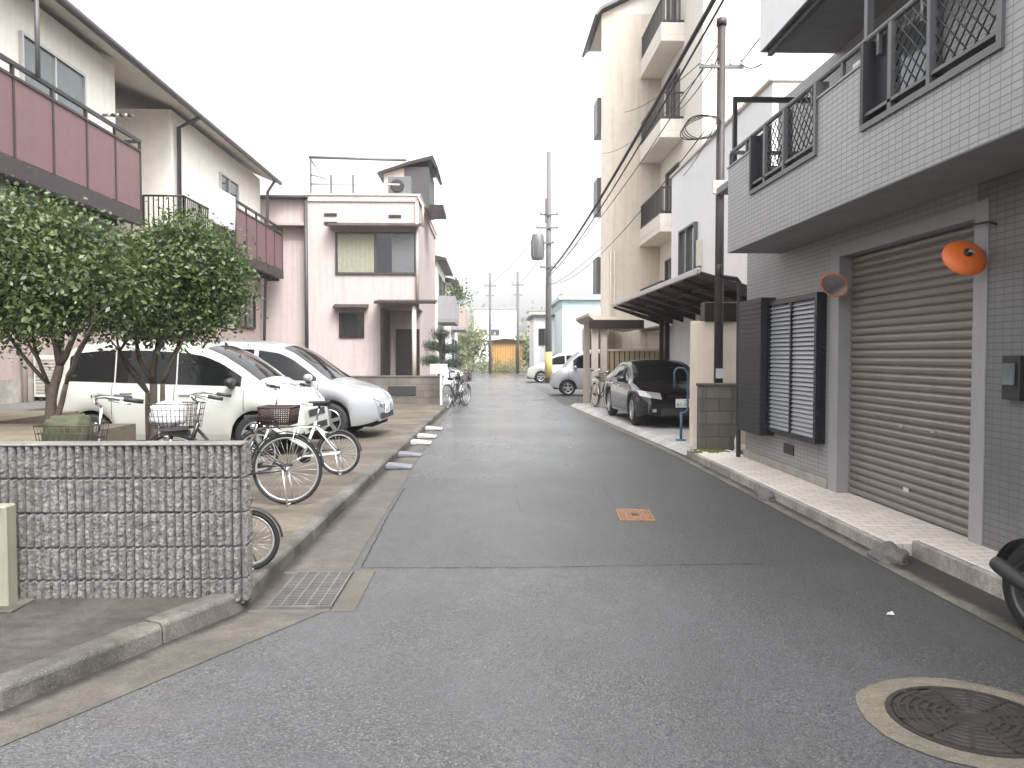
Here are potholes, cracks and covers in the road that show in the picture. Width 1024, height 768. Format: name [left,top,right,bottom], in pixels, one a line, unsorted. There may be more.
manhole cover [856,677,1024,768]
drain grate [248,570,376,615]
manhole cover [615,509,656,521]
